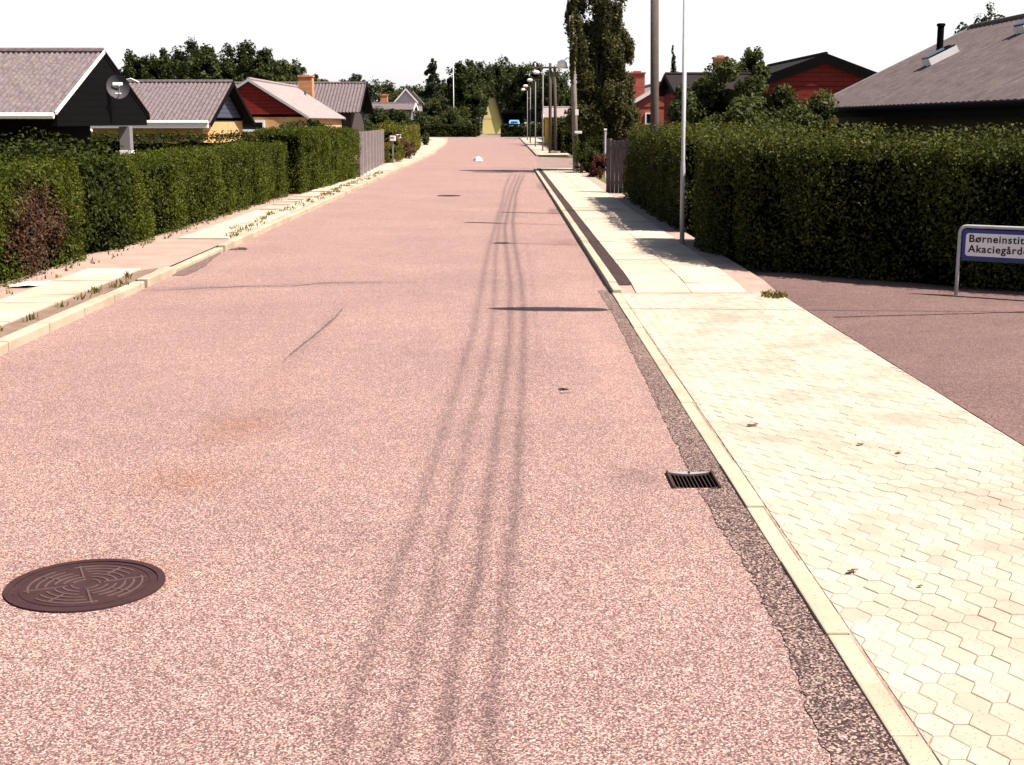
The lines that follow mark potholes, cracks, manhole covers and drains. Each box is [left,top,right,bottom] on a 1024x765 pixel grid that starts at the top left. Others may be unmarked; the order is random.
manhole cover [3,559,166,613]
crack [284,307,344,361]
crack [147,282,364,291]
drain grate [666,470,721,489]
